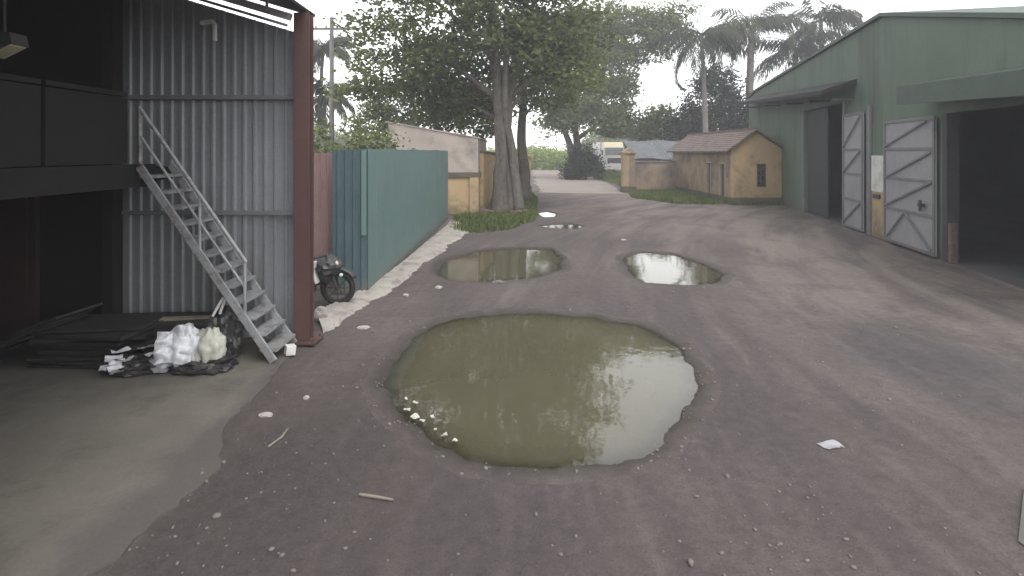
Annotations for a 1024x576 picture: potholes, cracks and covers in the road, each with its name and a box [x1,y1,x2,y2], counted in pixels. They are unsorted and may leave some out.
pothole [614,250,737,287]
pothole [532,222,591,230]
pothole [361,308,722,484]
pothole [426,246,572,284]
